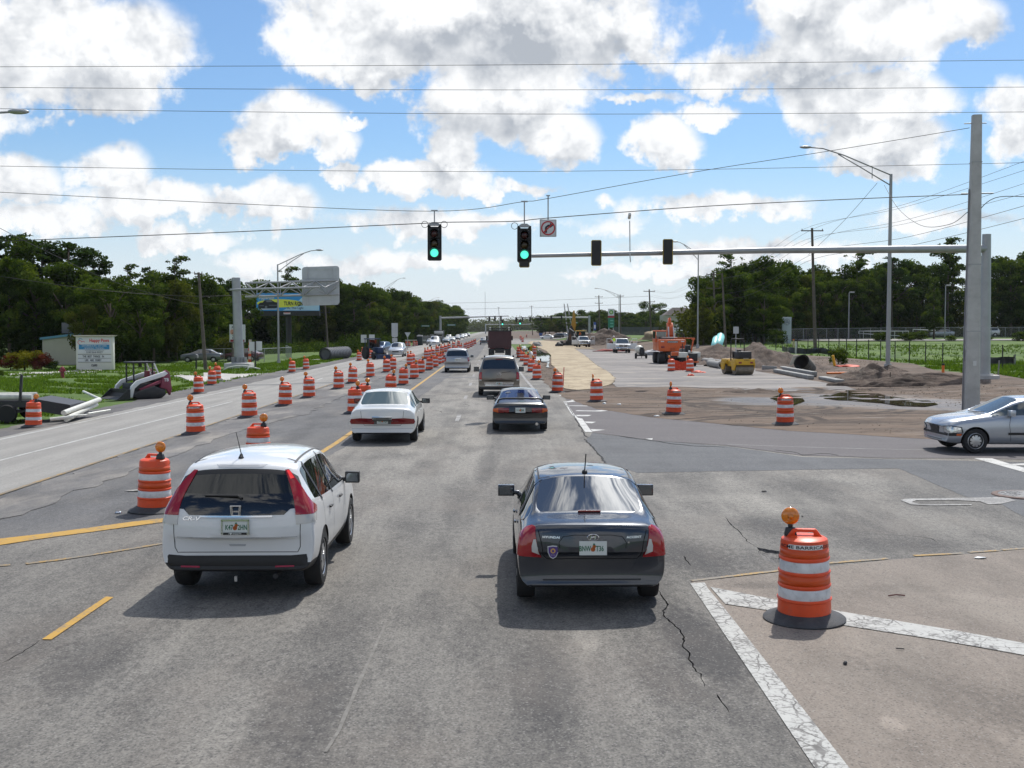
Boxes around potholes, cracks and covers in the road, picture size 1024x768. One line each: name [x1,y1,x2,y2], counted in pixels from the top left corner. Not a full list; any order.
crack [659,591,729,712]
manhole cover [991,490,1024,500]
